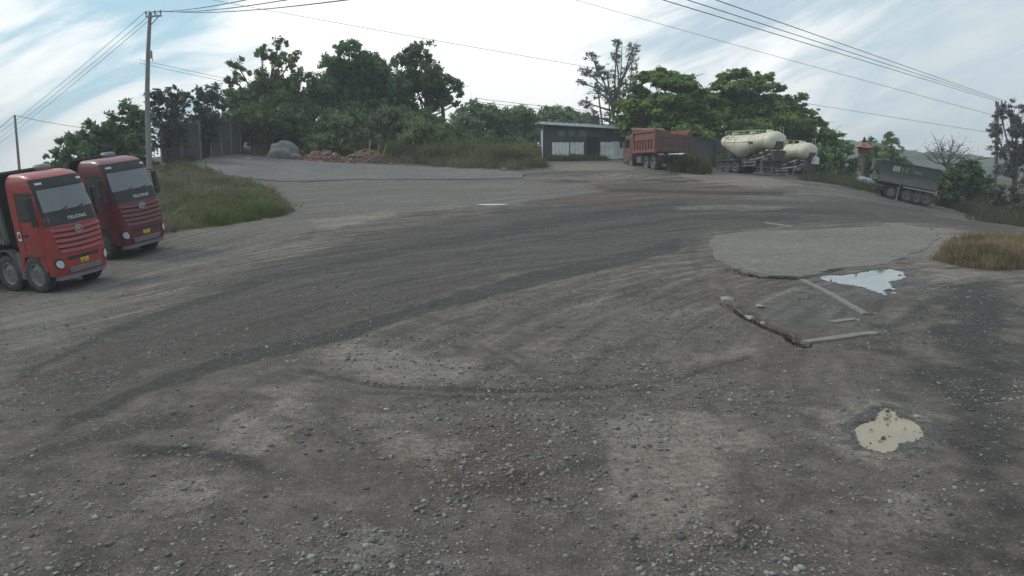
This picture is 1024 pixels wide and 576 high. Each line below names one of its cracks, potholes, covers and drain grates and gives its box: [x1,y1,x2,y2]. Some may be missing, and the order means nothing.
pothole [831,401,949,461]
crack [726,304,805,347]
pothole [794,266,929,298]
